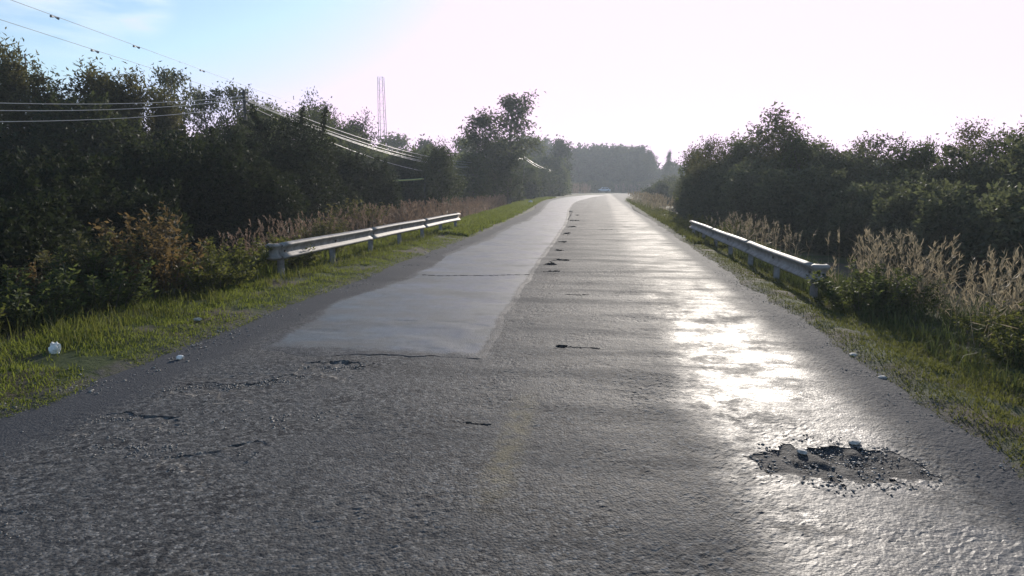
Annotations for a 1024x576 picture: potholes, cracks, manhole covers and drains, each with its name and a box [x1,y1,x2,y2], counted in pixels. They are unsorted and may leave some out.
pothole [743,443,941,488]
pothole [284,360,365,383]
